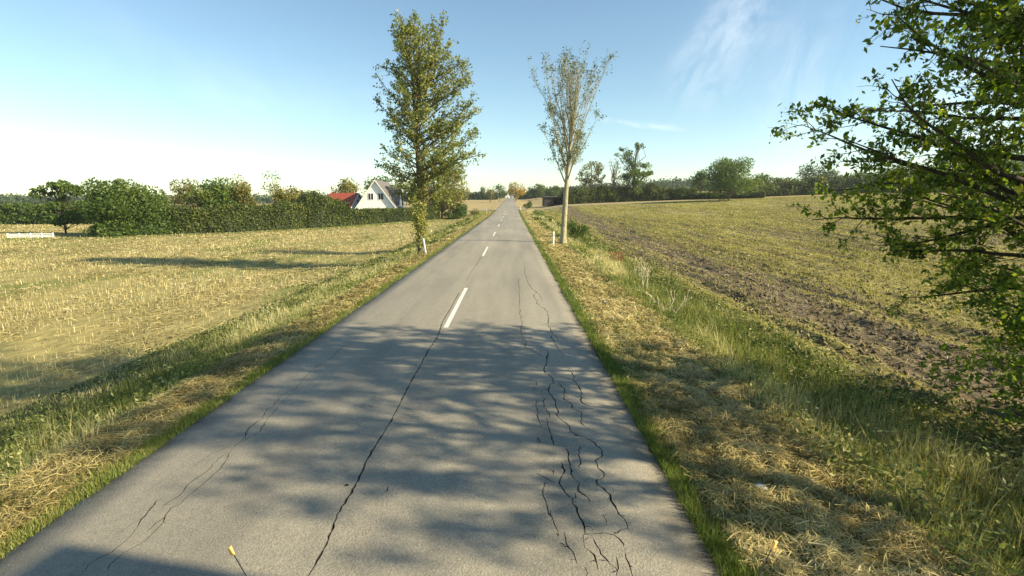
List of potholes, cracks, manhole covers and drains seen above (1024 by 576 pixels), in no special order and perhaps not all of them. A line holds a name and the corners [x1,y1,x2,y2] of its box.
crack [518,268,633,576]
crack [309,257,481,575]
crack [79,346,343,576]
